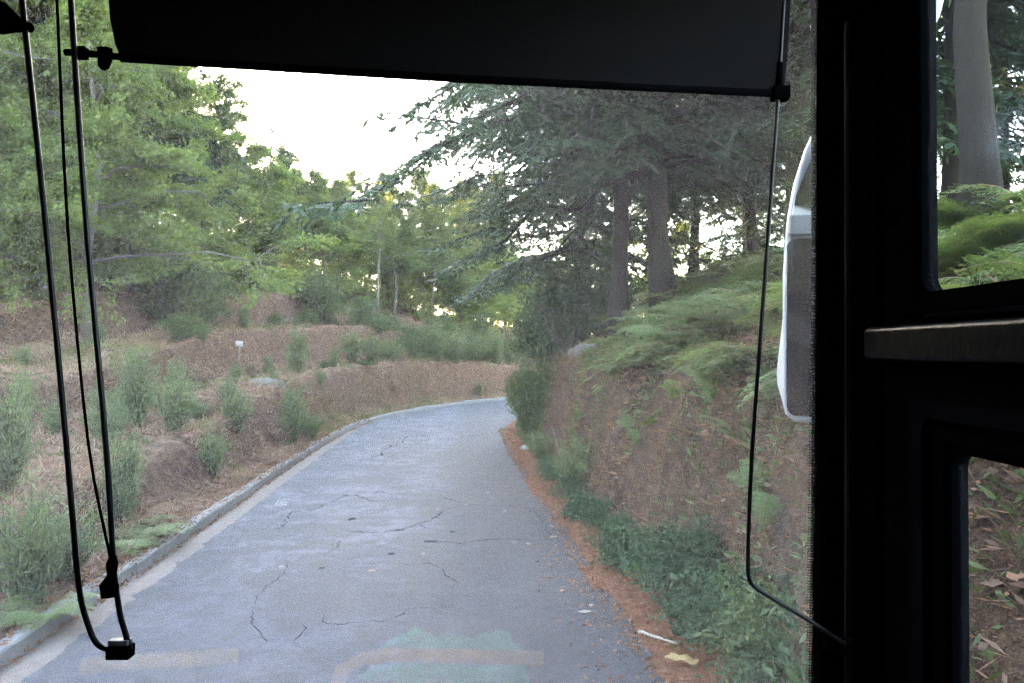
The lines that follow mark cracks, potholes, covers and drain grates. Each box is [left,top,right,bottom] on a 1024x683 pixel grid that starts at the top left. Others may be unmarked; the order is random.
crack [273,492,374,531]
crack [330,498,551,551]
crack [294,608,414,641]
crack [250,561,290,644]
